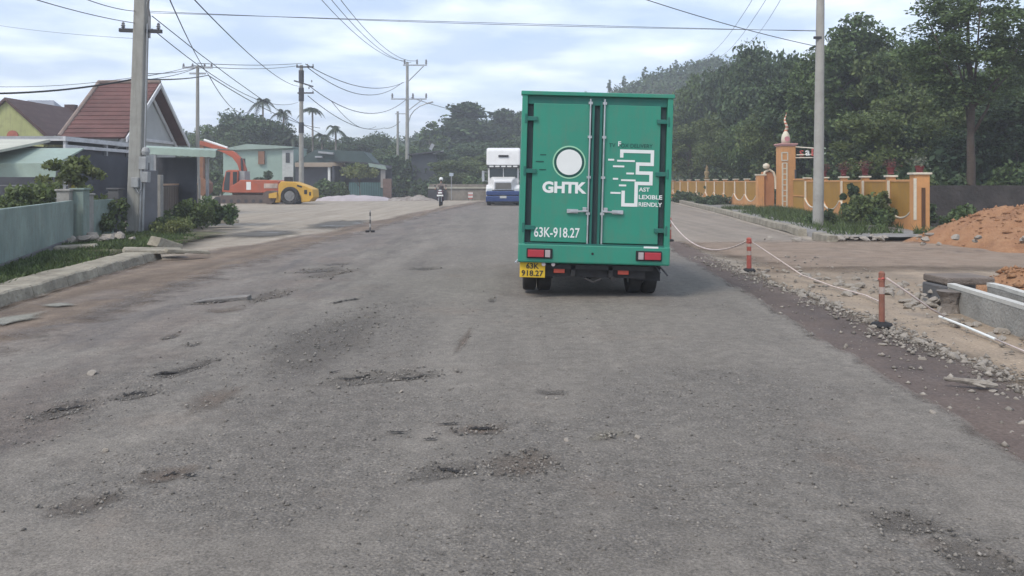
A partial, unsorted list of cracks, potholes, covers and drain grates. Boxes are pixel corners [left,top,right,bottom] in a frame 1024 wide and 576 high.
pothole [99,384,164,404]
pothole [394,452,494,485]
pothole [140,351,237,386]
pothole [131,463,211,483]
pothole [23,395,112,429]
pothole [282,365,461,391]
pothole [32,487,127,522]
pothole [433,420,508,435]
pothole [225,303,403,399]
pothole [238,284,300,306]
pothole [467,445,581,482]
